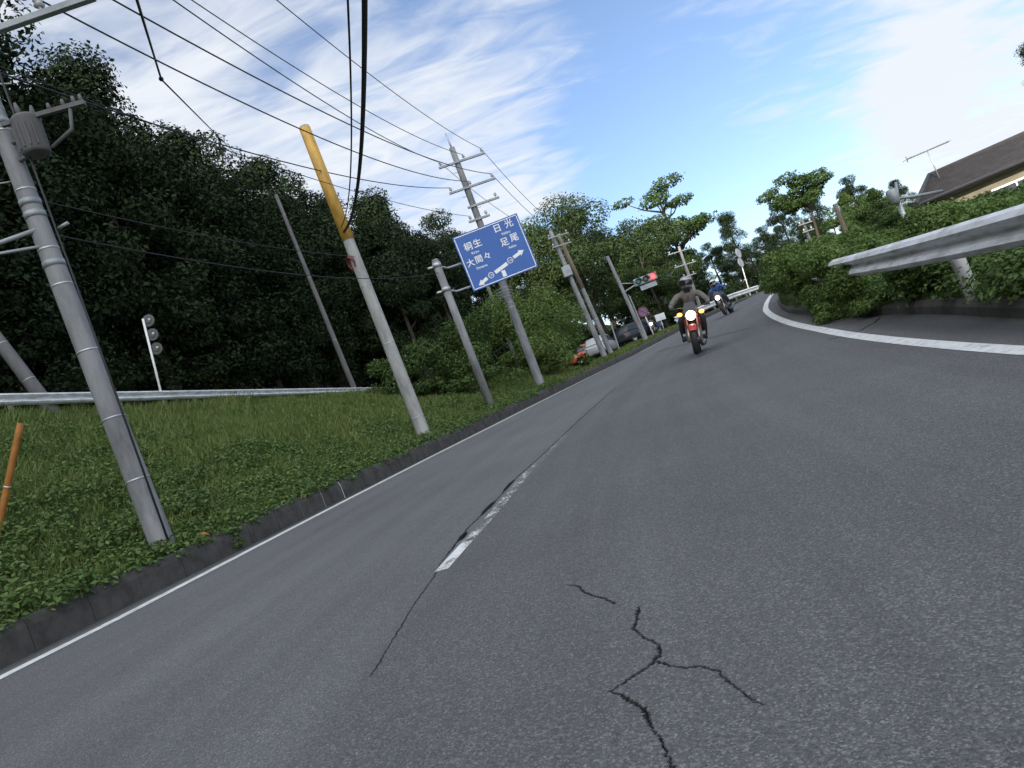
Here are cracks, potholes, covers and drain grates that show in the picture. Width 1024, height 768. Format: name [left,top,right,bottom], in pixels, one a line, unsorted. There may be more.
crack [567,584,763,768]
